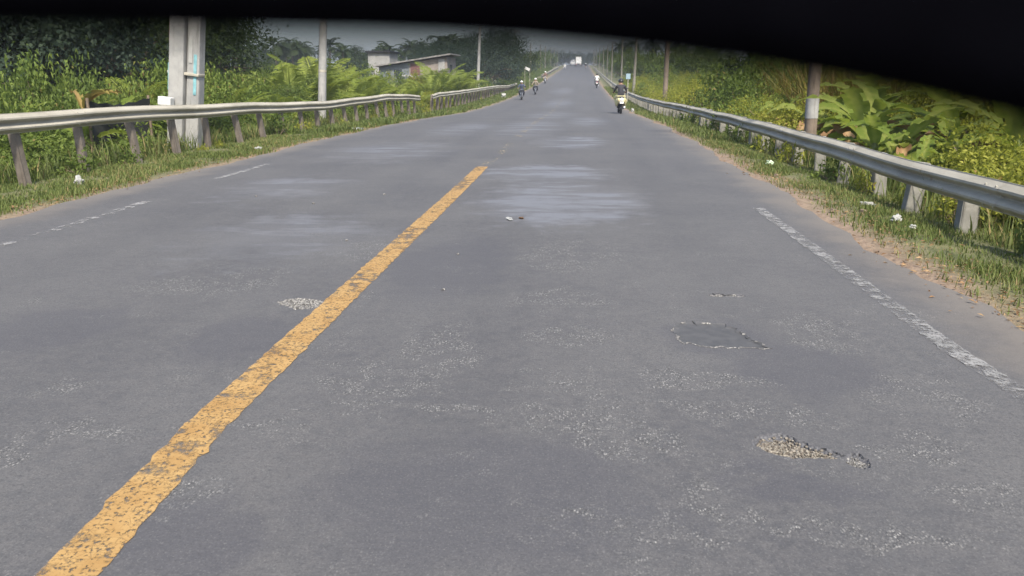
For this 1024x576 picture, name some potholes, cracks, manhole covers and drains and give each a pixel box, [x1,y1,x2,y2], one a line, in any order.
pothole [752,433,847,459]
pothole [278,298,323,310]
pothole [846,453,871,469]
